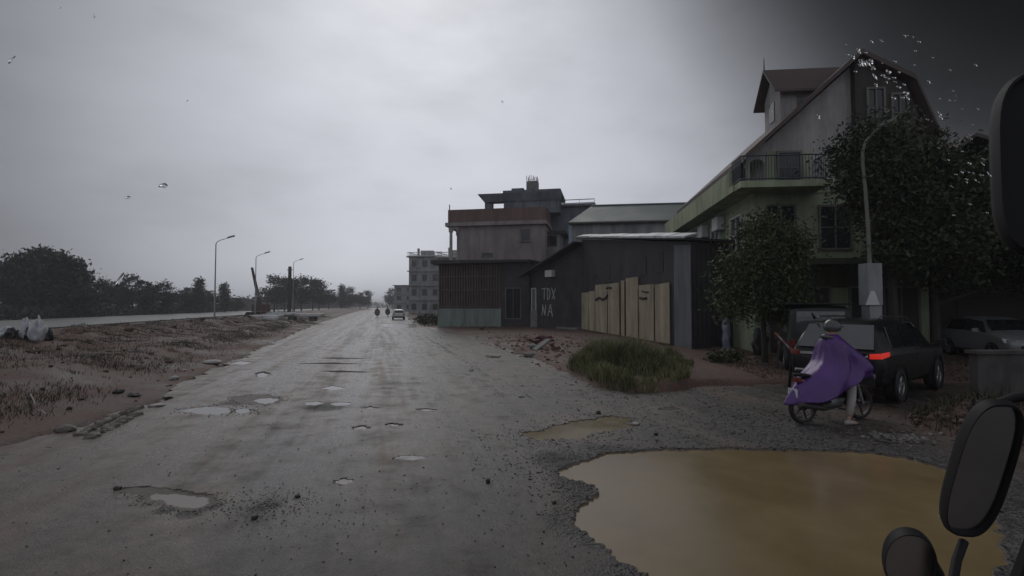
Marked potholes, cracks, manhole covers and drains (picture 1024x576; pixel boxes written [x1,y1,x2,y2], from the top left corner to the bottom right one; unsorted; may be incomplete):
pothole [555,447,1015,576]
pothole [229,395,283,405]
pothole [521,415,635,441]
pothole [181,406,232,415]
pothole [332,478,354,486]
pothole [120,486,217,512]
